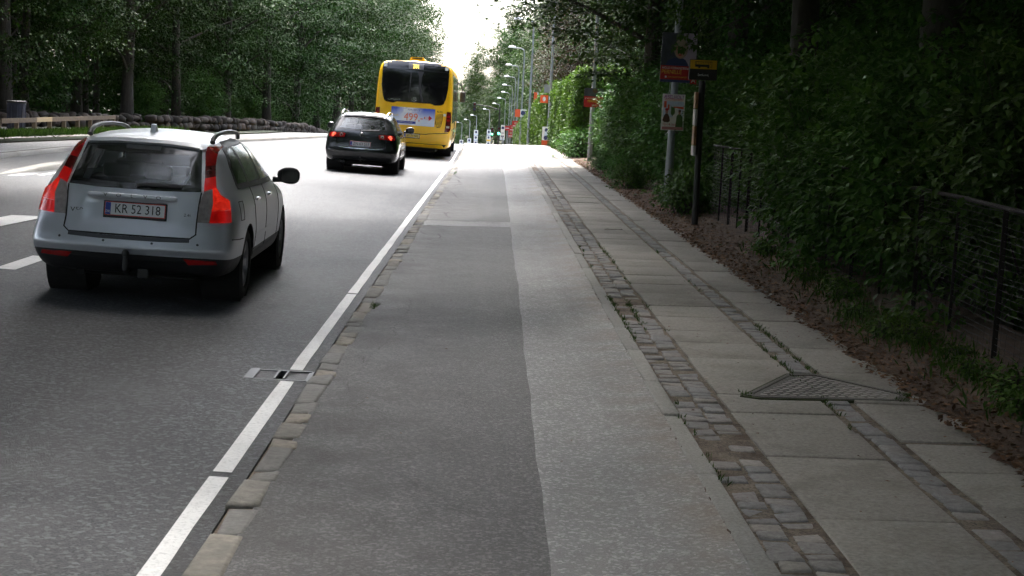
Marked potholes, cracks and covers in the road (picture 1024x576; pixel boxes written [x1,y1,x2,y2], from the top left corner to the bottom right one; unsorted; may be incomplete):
drain grate [243,368,315,382]
